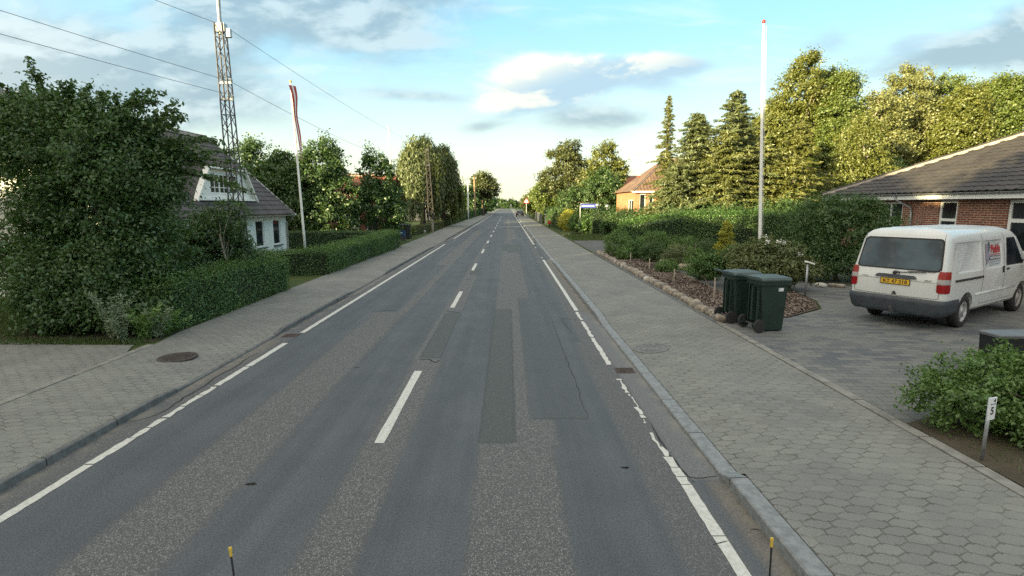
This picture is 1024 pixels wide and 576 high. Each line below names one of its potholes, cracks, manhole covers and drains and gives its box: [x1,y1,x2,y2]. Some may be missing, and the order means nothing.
crack [128,357,249,422]
manhole cover [633,343,669,354]
manhole cover [156,352,198,362]
crack [650,423,713,483]
